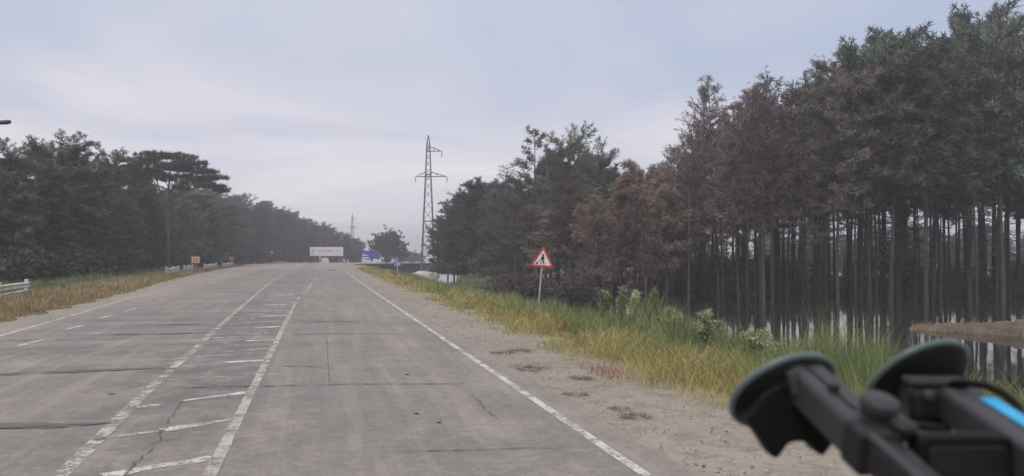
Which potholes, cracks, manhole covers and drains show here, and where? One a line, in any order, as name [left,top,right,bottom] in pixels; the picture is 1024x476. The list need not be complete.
crack [117,333,445,475]
